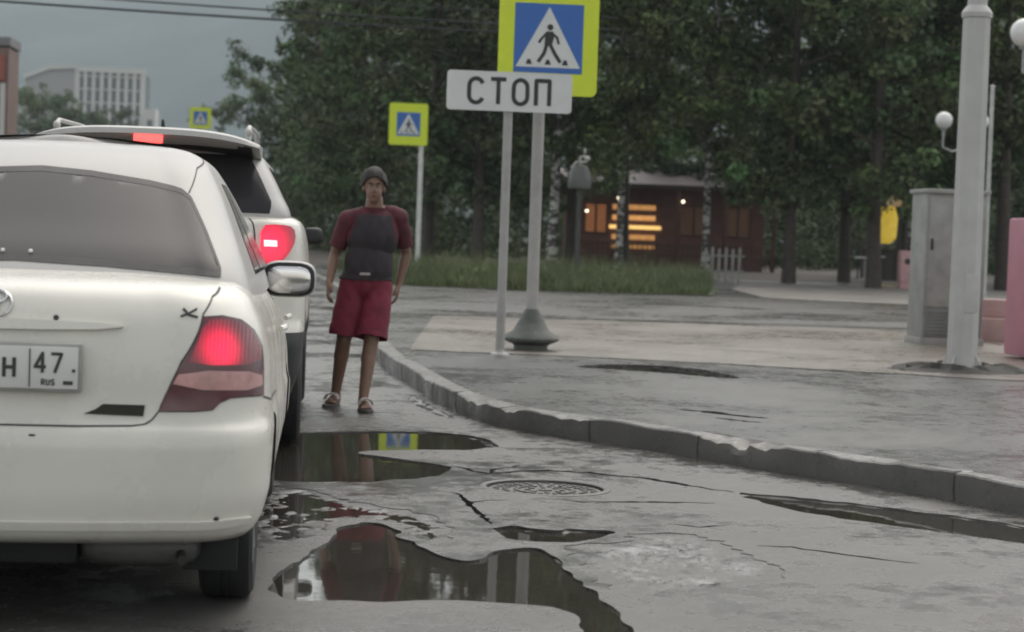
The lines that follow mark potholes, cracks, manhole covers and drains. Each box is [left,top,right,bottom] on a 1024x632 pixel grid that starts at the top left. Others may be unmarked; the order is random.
crack [677,409,764,423]
pothole [300,431,499,469]
pothole [577,364,739,379]
crack [258,465,732,545]
manhole cover [479,478,611,497]
crack [563,524,919,599]
pothole [268,522,634,632]
